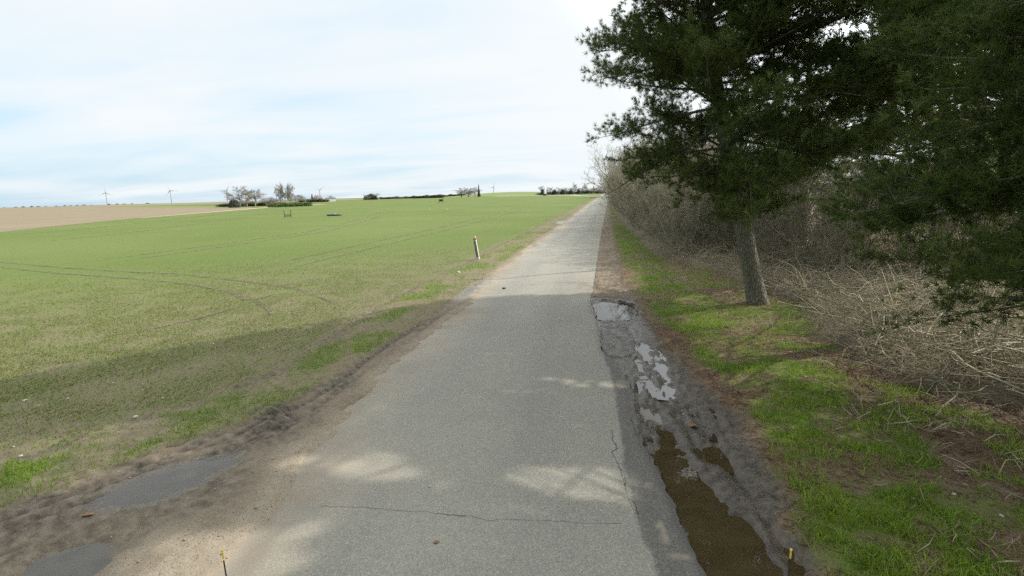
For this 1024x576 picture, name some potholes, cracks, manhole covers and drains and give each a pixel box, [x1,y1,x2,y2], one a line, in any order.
pothole [590,298,639,358]
crack [328,506,616,524]
